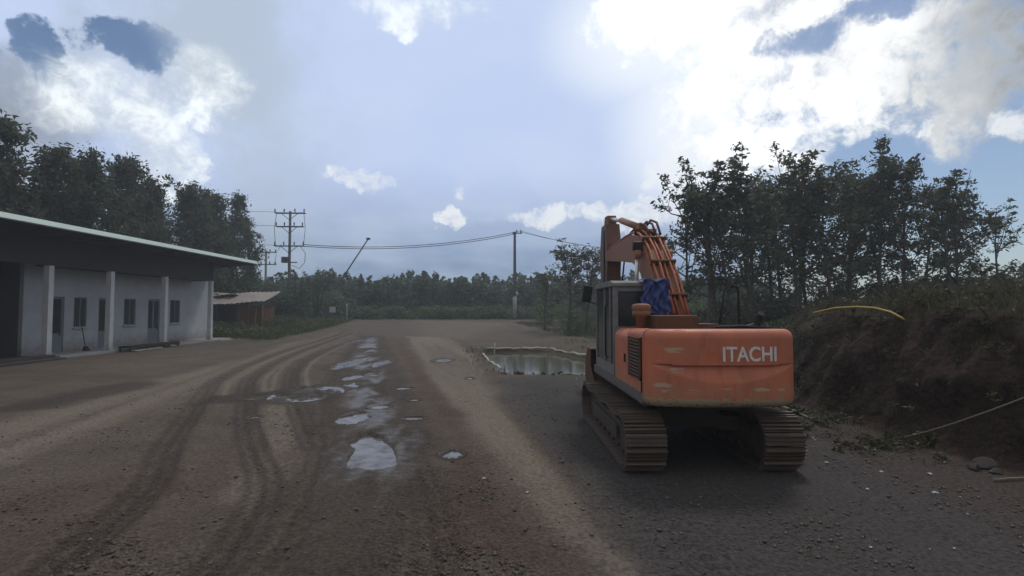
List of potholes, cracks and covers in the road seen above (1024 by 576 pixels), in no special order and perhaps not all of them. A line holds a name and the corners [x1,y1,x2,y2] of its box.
pothole [320,410,386,429]
pothole [363,357,399,370]
pothole [250,384,357,407]
pothole [436,448,468,461]
